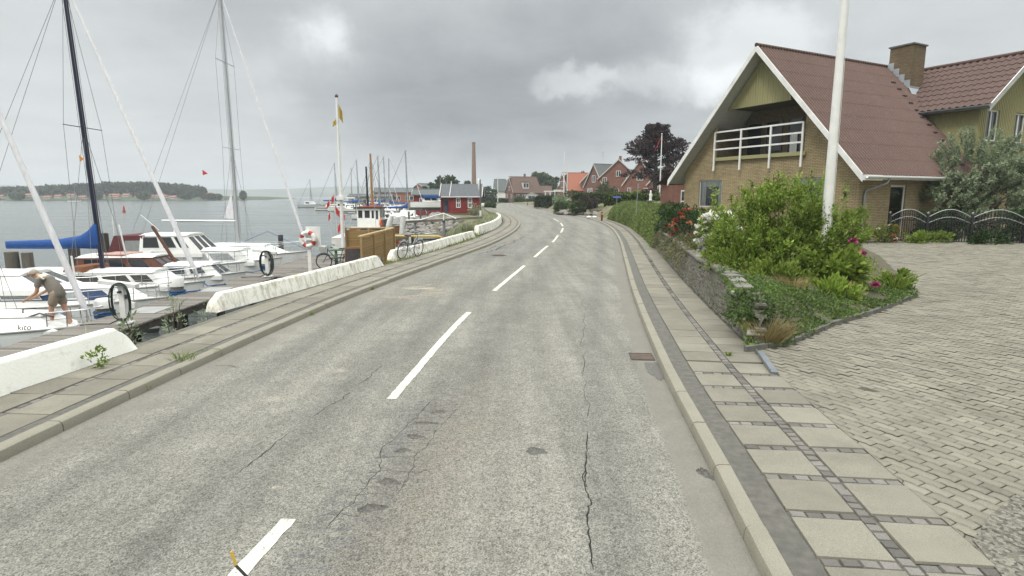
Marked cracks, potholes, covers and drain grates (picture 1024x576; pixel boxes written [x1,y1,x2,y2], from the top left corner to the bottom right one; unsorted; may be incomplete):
pothole [526,447,548,455]
drain grate [629,353,655,361]
pothole [357,504,389,513]
crack [238,434,287,473]
crack [315,394,479,528]
pothole [696,467,715,481]
crack [582,432,594,570]
